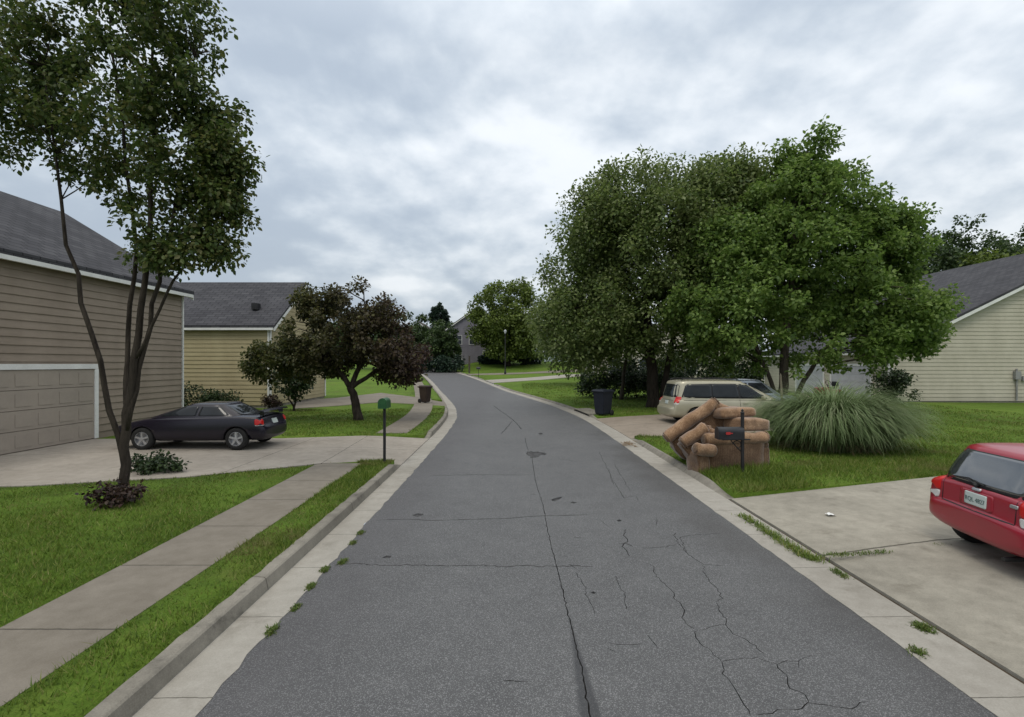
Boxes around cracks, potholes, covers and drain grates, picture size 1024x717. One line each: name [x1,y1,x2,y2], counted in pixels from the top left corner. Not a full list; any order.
crack [351,406,656,717]
crack [650,533,862,715]
